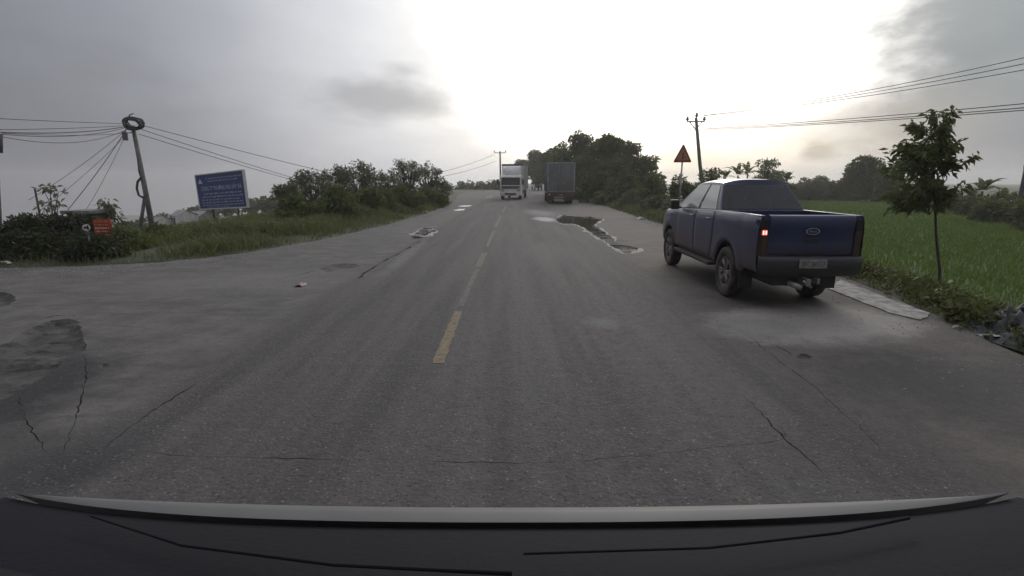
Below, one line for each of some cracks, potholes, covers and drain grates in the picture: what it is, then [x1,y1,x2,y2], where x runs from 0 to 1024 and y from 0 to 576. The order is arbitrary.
pothole [410,227,438,237]
pothole [553,215,644,254]
crack [138,395,824,475]
crack [18,358,88,453]
